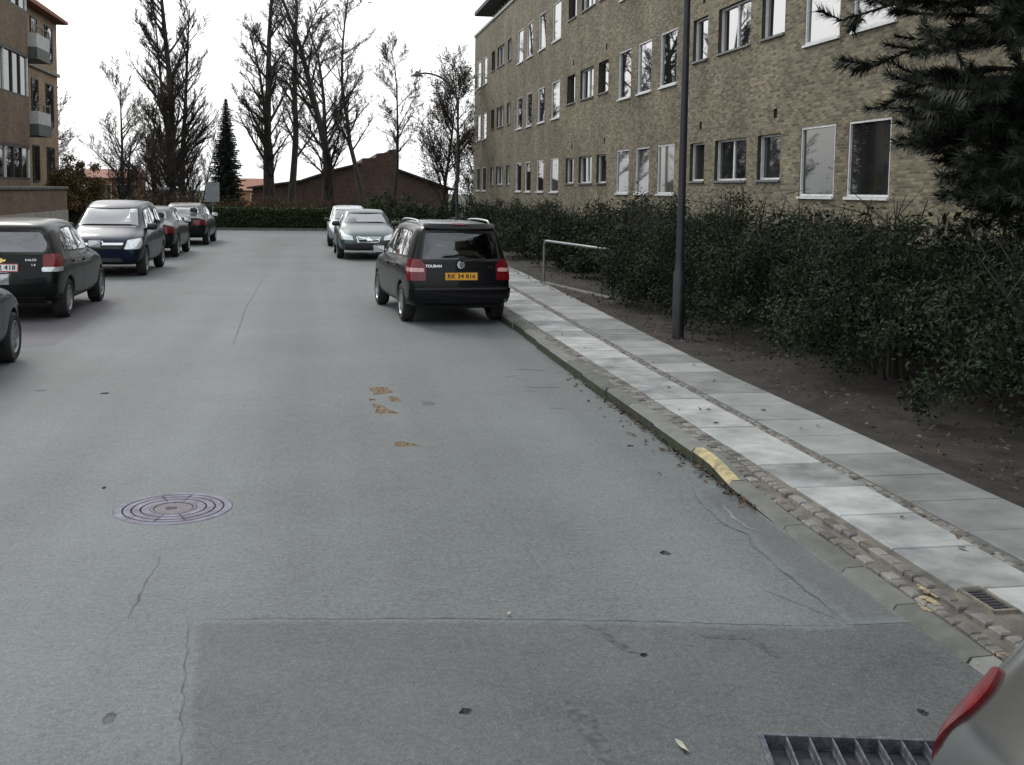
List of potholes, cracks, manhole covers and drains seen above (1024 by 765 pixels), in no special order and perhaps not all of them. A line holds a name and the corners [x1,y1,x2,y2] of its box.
drain grate [757,732,936,765]
crack [128,554,162,619]
crack [691,486,842,618]
pothole [103,712,117,725]
crack [232,278,264,345]
manhole cover [113,493,233,525]
crack [582,624,639,653]
